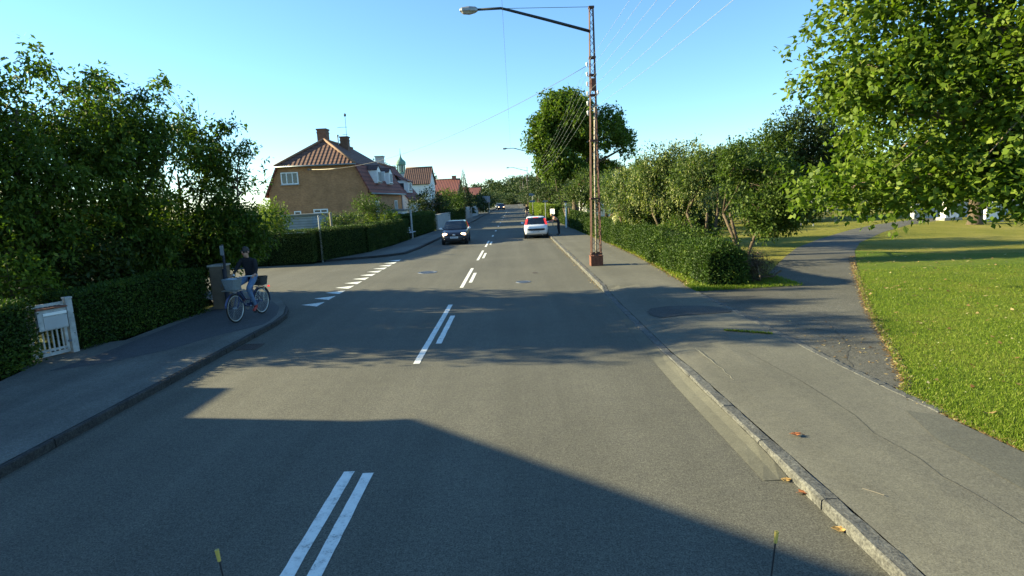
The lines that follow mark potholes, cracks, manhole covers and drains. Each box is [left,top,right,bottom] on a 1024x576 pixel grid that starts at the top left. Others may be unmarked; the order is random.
crack [817,328,873,367]
